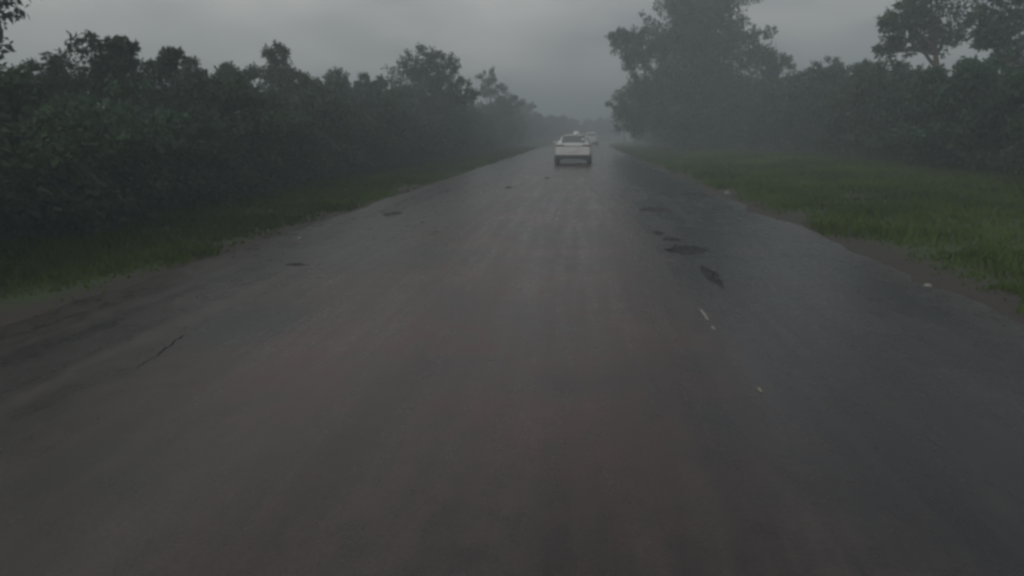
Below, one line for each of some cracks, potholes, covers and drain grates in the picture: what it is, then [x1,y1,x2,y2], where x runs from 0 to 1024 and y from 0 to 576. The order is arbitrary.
pothole [662,245,710,255]
crack [137,334,185,368]
pothole [700,265,725,290]
